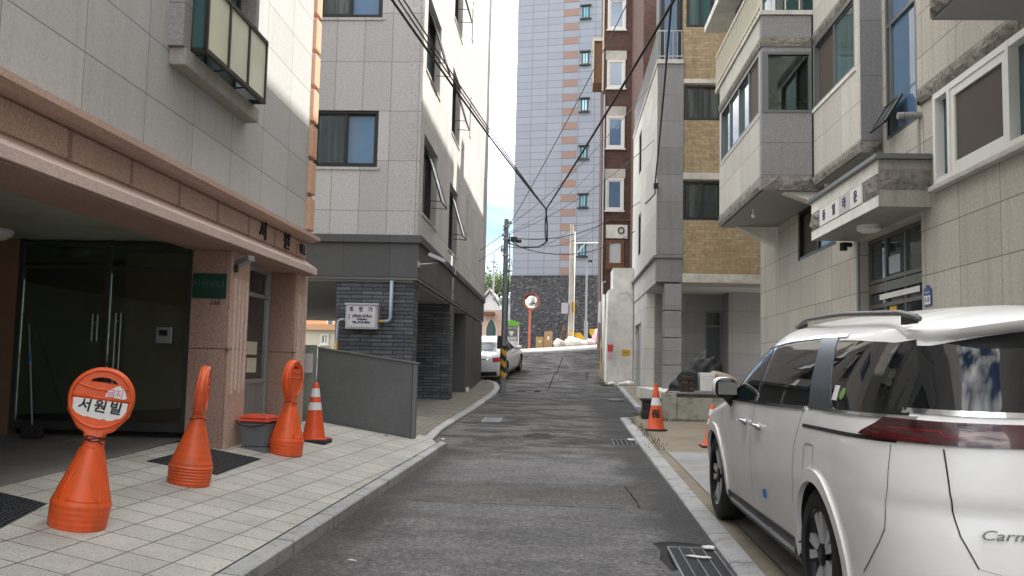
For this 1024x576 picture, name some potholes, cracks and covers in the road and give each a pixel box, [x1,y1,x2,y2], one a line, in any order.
crack [403,487,640,509]
drain grate [667,546,733,576]
